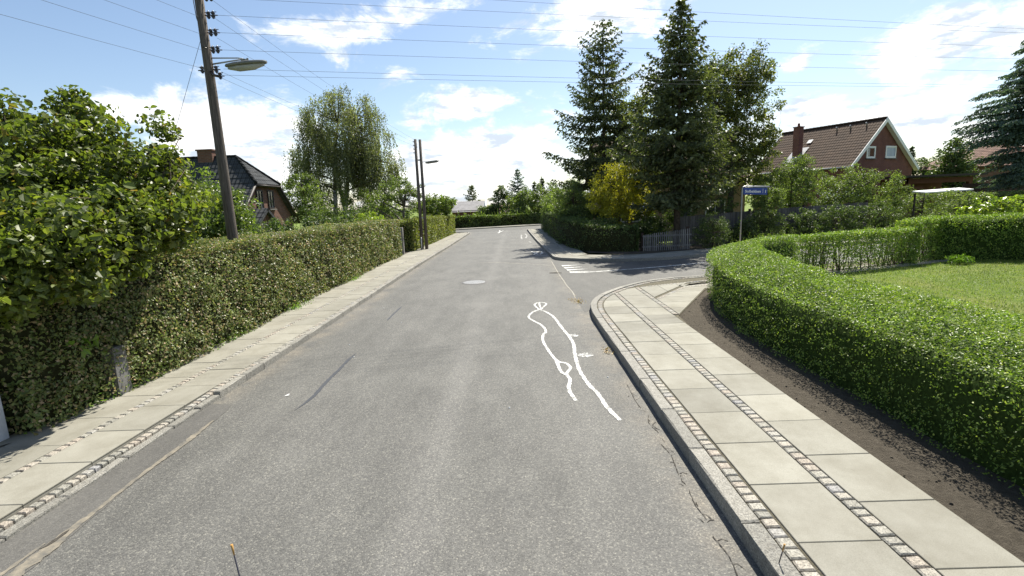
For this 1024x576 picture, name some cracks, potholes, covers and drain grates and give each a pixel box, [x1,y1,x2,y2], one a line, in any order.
crack [626,385,746,575]
